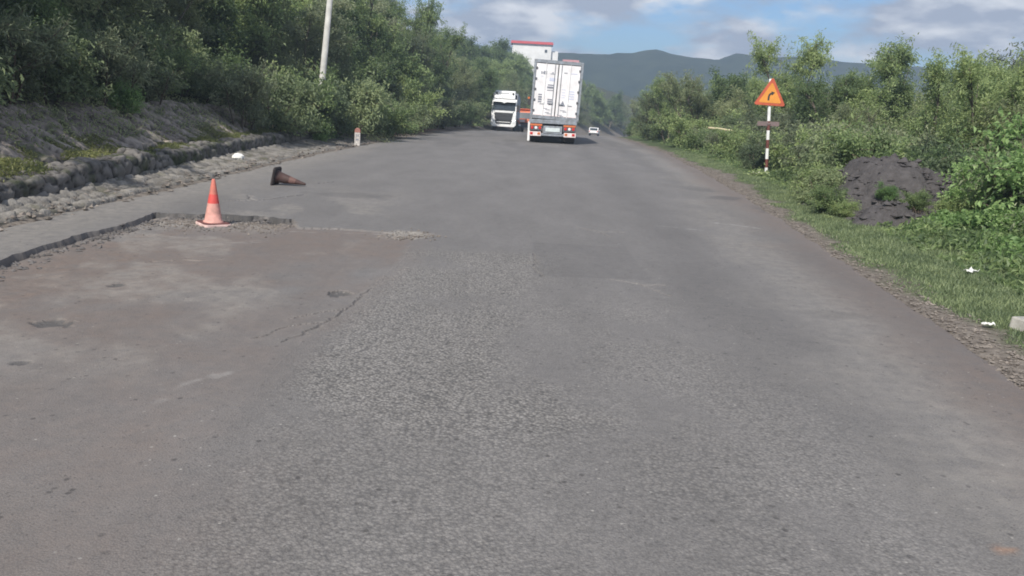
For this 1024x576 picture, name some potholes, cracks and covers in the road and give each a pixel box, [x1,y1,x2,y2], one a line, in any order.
pothole [26,318,82,328]
crack [251,287,375,343]
pothole [327,290,355,298]
